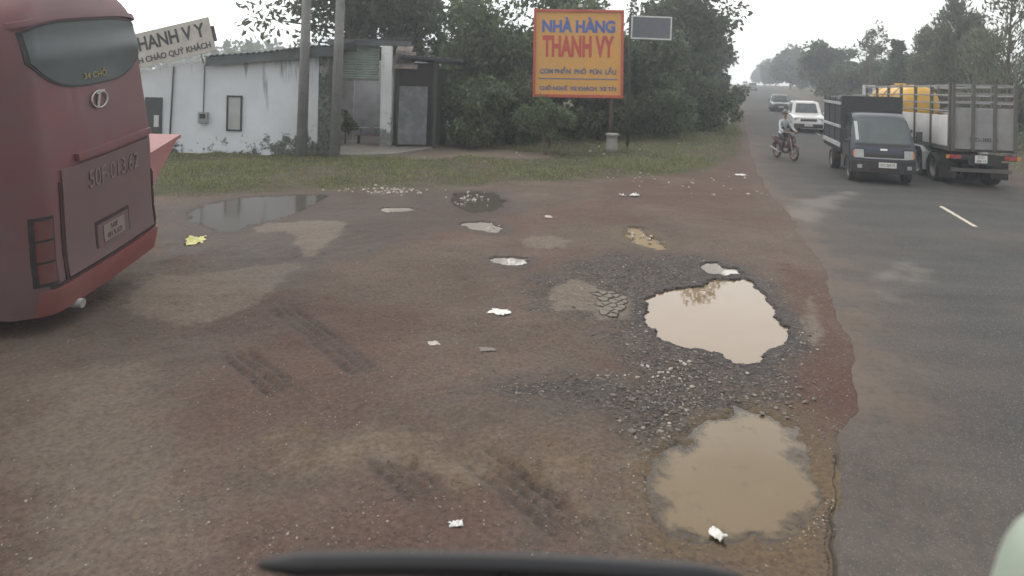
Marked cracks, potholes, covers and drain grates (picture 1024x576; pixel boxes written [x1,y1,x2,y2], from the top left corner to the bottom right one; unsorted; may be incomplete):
pothole [689,259,753,281]
pothole [478,253,539,269]
pothole [633,275,808,374]
pothole [439,189,515,216]
pothole [629,396,842,566]
pothole [450,219,514,235]
pothole [610,224,683,254]
